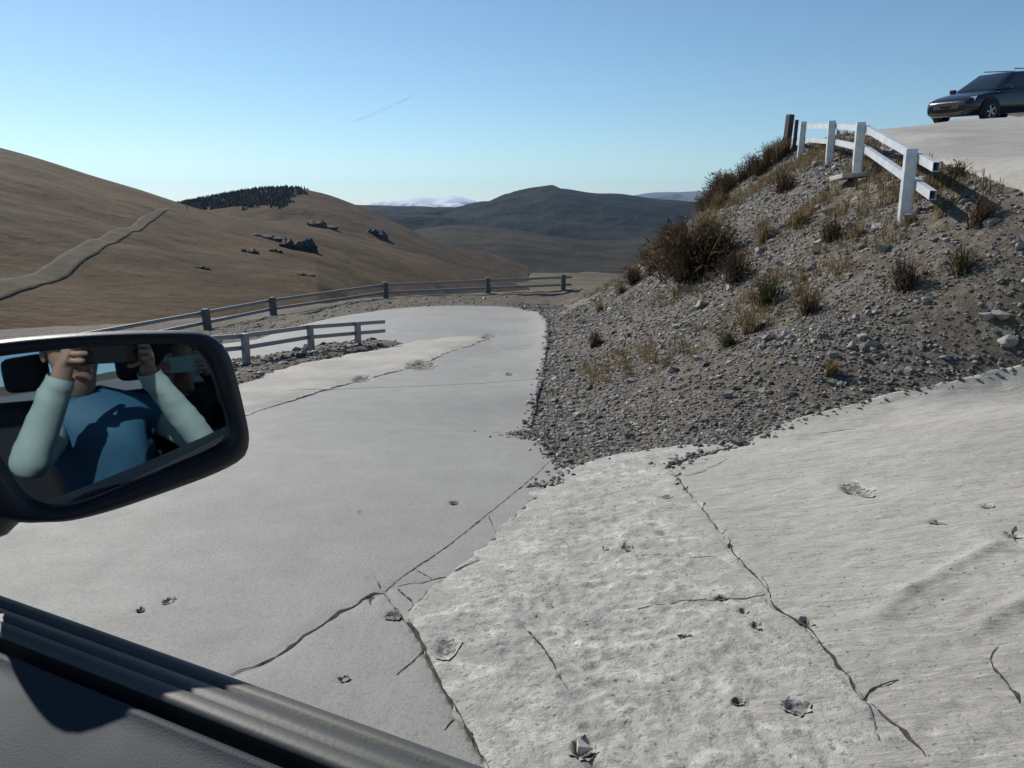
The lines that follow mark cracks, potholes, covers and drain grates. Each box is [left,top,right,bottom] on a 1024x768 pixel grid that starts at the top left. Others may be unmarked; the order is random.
pothole [433,634,462,660]
crack [522,625,569,690]
crack [231,560,479,675]
crack [638,446,926,756]
crack [990,646,1020,703]
pothole [838,480,876,497]
pothole [779,698,812,716]
